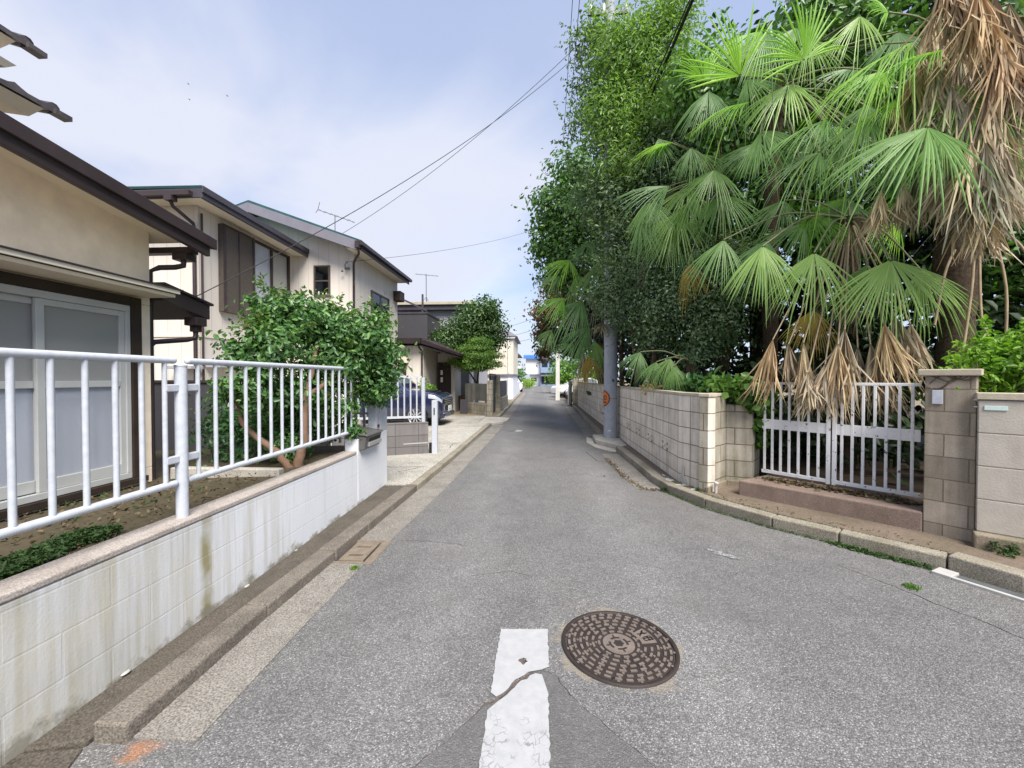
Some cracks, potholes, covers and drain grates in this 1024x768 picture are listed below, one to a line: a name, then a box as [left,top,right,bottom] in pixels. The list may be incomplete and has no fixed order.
crack [410,671,656,768]
manhole cover [562,611,680,689]
drain grate [332,540,392,564]
